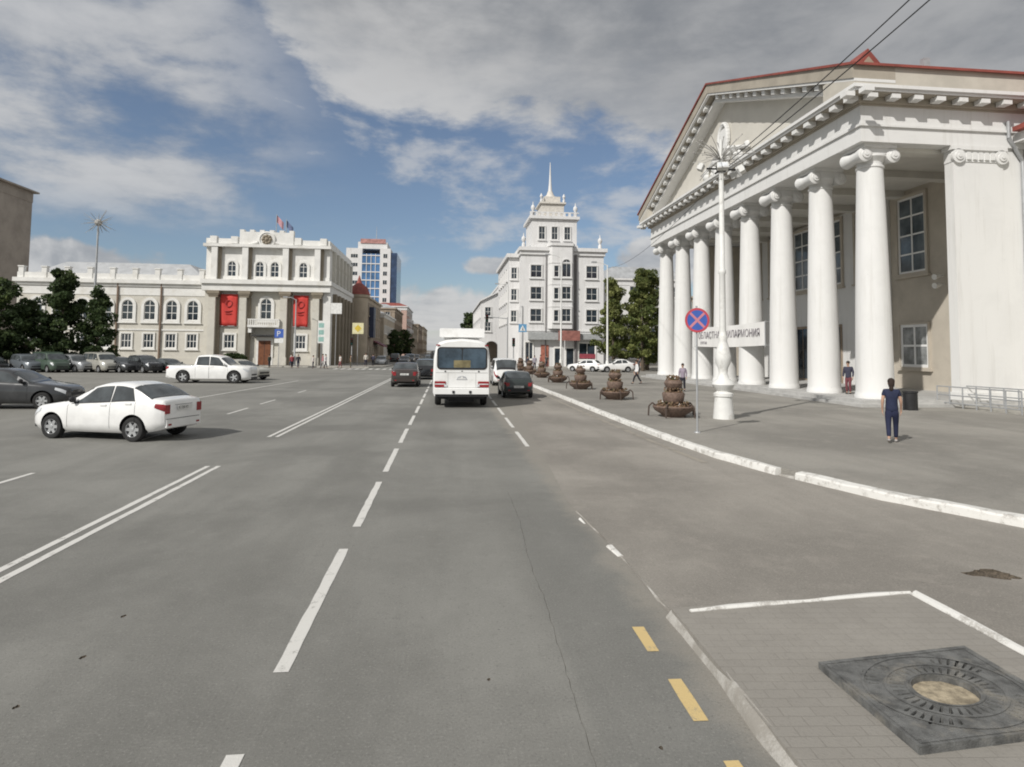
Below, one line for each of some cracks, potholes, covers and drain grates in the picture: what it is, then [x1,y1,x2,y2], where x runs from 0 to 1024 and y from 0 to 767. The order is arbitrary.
pothole [961,569,1022,580]
